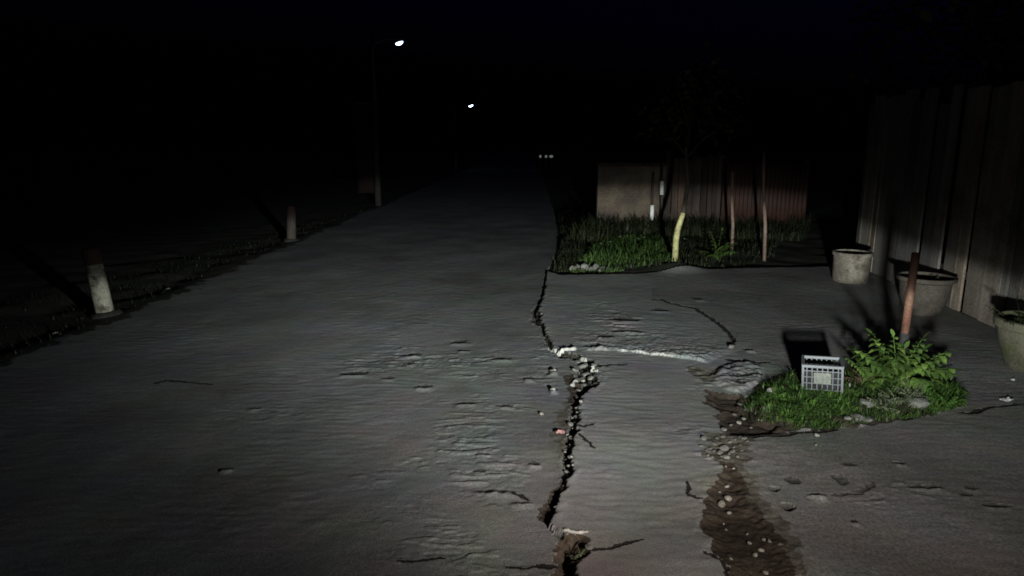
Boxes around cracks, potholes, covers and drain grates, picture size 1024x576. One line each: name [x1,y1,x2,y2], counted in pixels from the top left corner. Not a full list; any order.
crack [511,492,530,501]
crack [562,528,644,553]
crack [957,403,1024,414]
crack [529,271,770,501]
pothole [699,461,797,576]
pothole [702,389,786,437]
